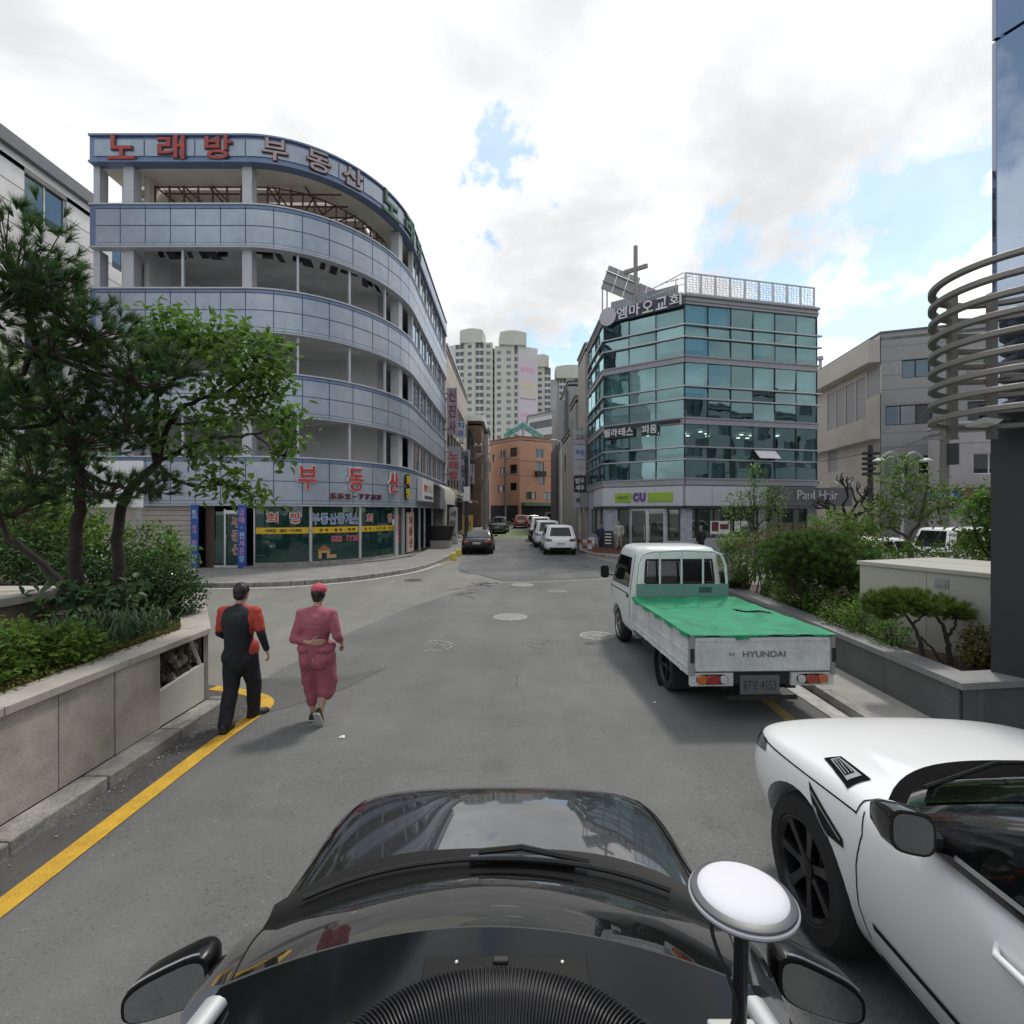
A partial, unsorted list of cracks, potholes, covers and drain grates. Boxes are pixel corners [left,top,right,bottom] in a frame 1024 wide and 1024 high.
crack [449,548,597,599]
manhole cover [580,631,615,640]
